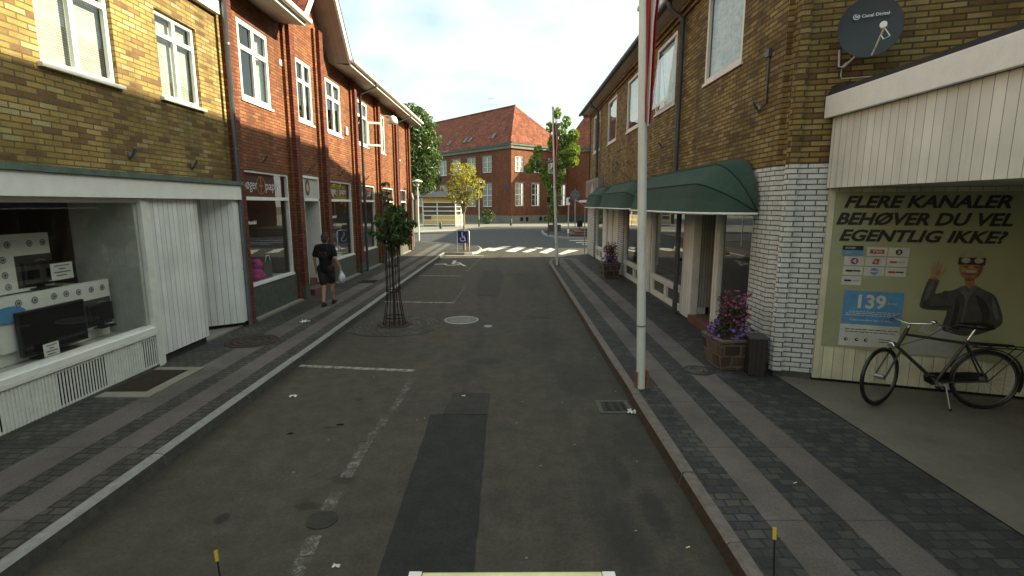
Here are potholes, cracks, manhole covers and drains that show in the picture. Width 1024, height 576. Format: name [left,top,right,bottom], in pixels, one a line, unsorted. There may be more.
drain grate [595,400,634,414]
manhole cover [444,316,479,324]
manhole cover [224,334,279,348]
manhole cover [683,365,714,375]
